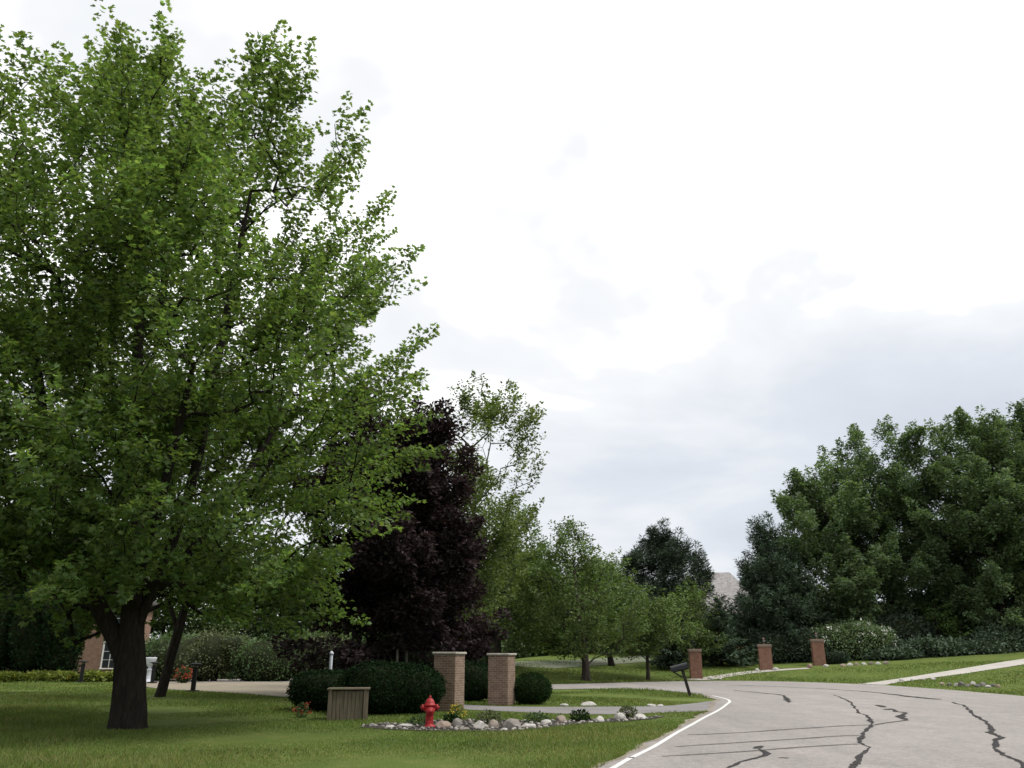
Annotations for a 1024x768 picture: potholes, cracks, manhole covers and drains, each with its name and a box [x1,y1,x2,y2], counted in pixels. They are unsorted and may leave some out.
crack [669,725,859,758]
